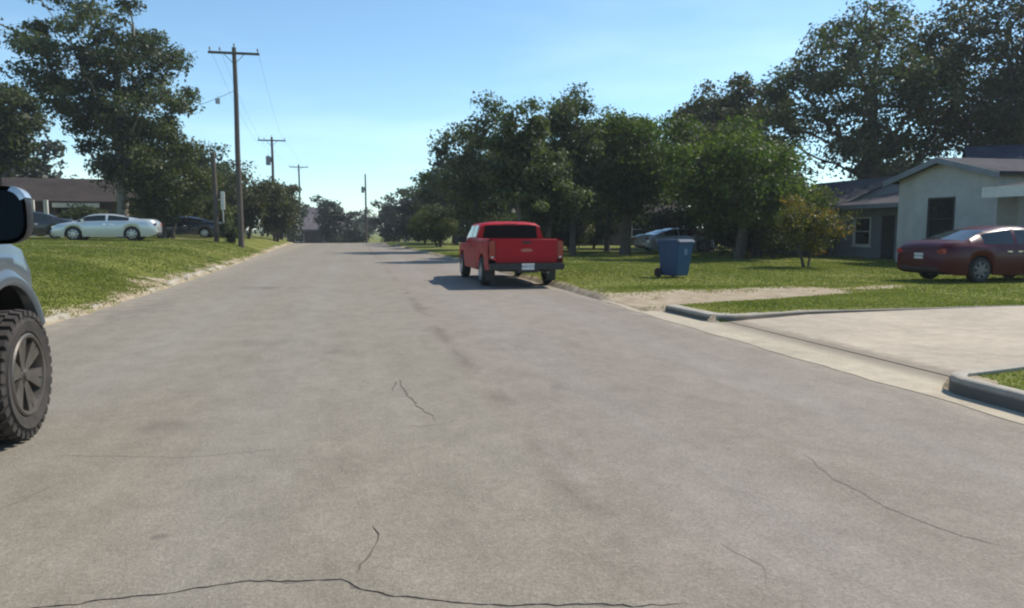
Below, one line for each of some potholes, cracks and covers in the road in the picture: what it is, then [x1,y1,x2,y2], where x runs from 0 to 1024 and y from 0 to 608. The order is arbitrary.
crack [804,454,1007,547]
crack [66,450,266,458]
crack [35,527,683,608]
crack [722,544,766,583]
crack [391,380,455,427]
